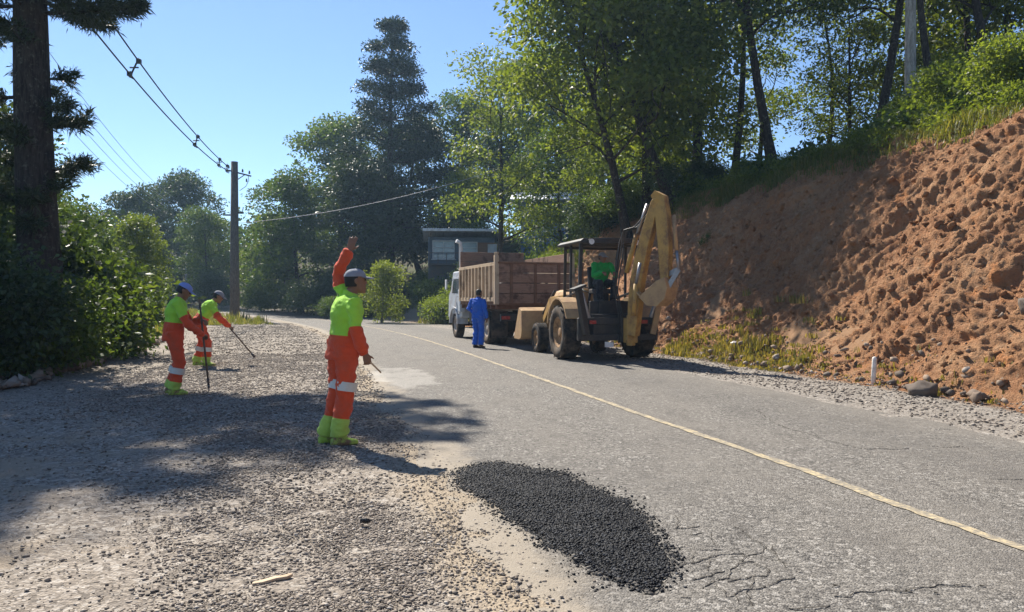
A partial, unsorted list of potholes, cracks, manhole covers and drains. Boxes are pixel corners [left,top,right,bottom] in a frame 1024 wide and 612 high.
crack [665,515,972,610]
